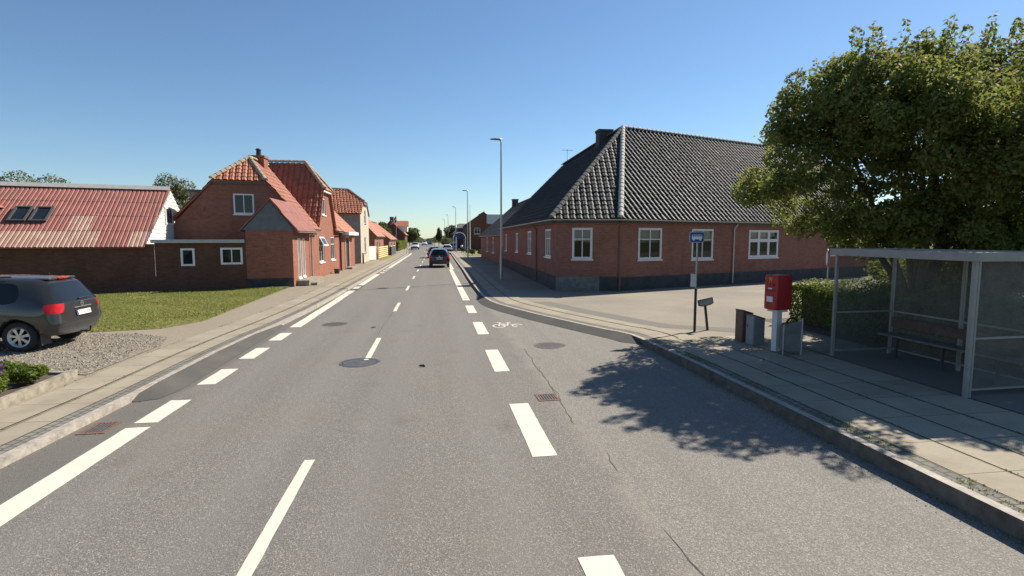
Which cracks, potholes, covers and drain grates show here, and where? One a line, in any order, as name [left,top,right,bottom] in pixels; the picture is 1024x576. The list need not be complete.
manhole cover [339,358,381,368]
drain grate [534,393,561,401]
drain grate [75,421,124,435]
crack [661,526,705,576]
crack [524,349,572,422]
